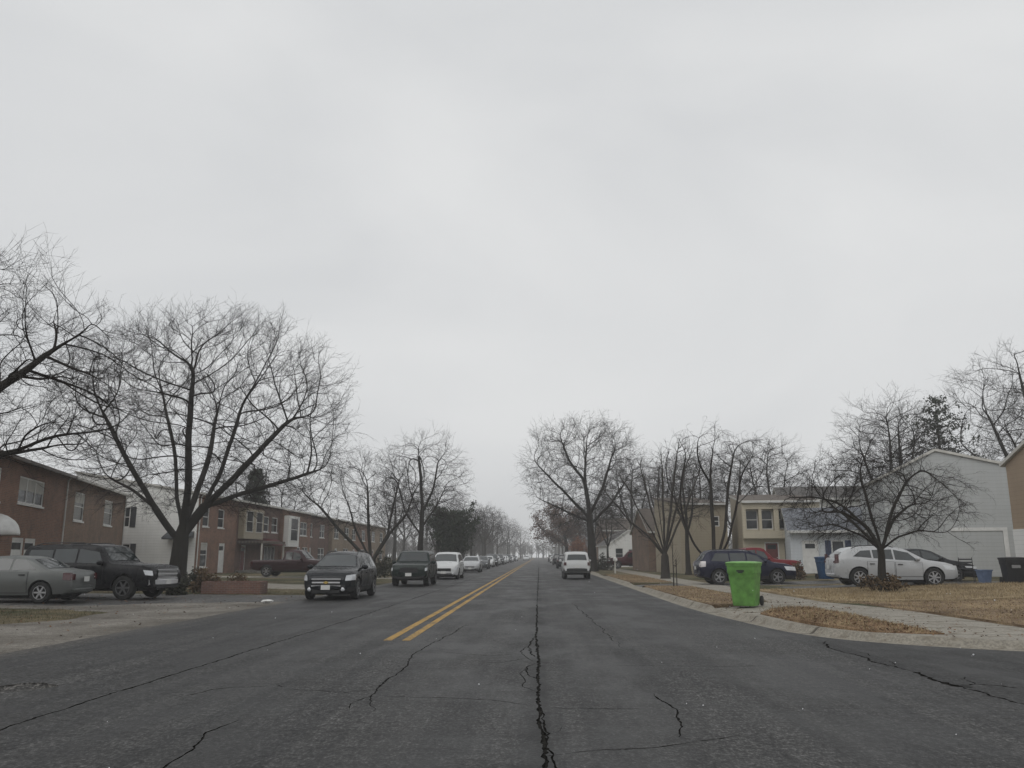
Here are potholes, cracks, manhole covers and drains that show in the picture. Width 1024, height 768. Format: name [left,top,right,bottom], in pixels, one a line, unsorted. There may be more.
crack [823,642,1022,704]
crack [552,696,746,750]
crack [163,720,238,768]
pothole [0,683,58,694]
crack [178,627,527,710]
